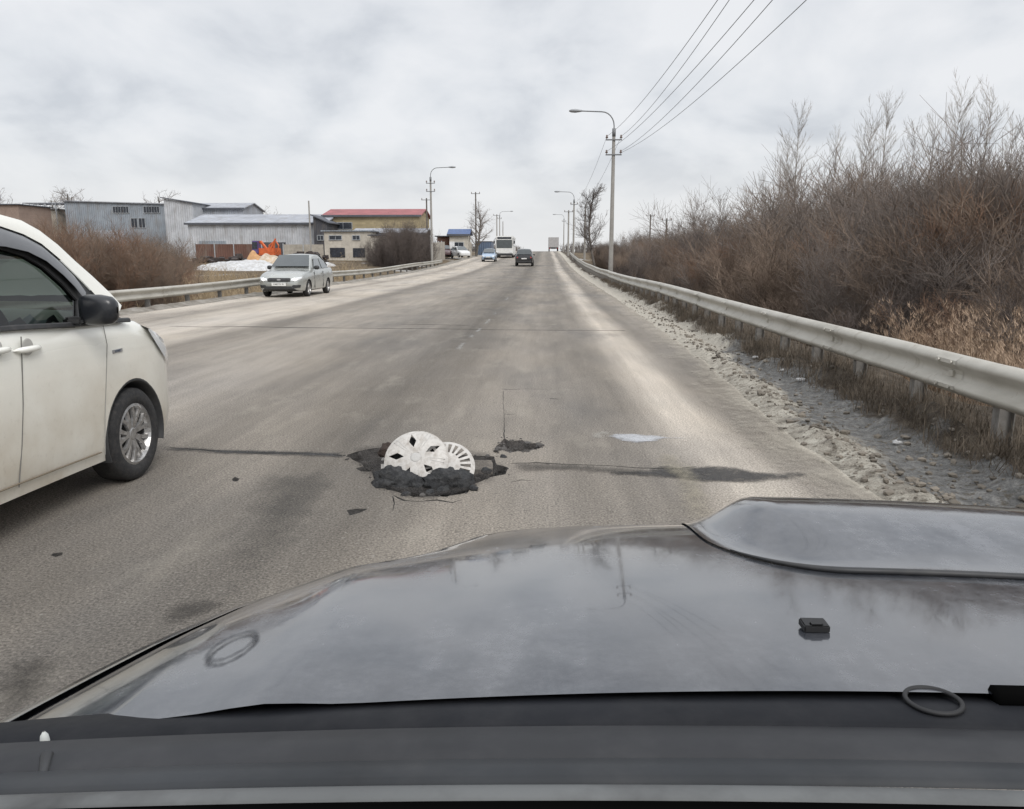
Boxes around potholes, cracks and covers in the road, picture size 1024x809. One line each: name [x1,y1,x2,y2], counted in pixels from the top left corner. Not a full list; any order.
pothole [346,448,507,497]
pothole [496,438,540,452]
